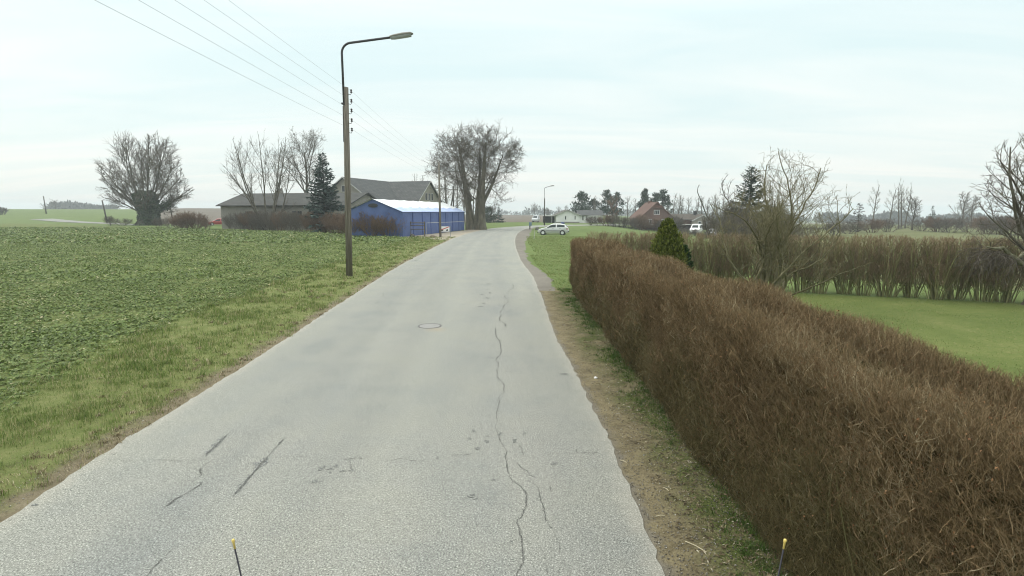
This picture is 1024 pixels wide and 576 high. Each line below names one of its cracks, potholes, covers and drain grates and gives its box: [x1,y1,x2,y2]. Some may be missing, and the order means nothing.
crack [495,284,560,576]
crack [166,435,283,506]
